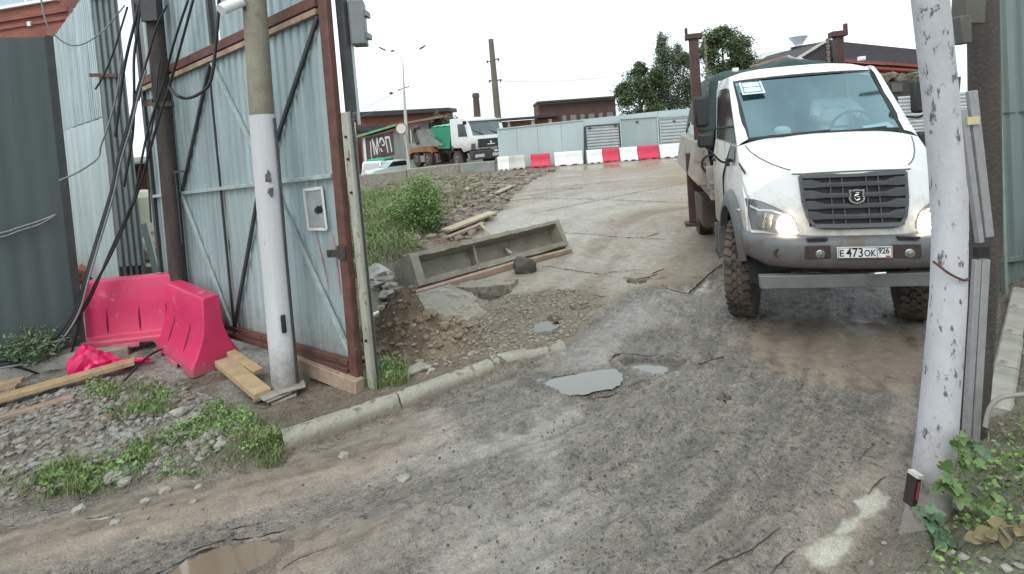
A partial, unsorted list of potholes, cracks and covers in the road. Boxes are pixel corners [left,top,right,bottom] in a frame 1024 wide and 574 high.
pothole [469,288,515,304]
pothole [610,355,695,377]
pothole [165,537,295,574]
pothole [514,364,632,400]
crack [542,263,723,311]
crack [858,444,887,495]
crack [609,353,724,368]
pothole [622,279,651,287]
crack [702,527,795,574]
